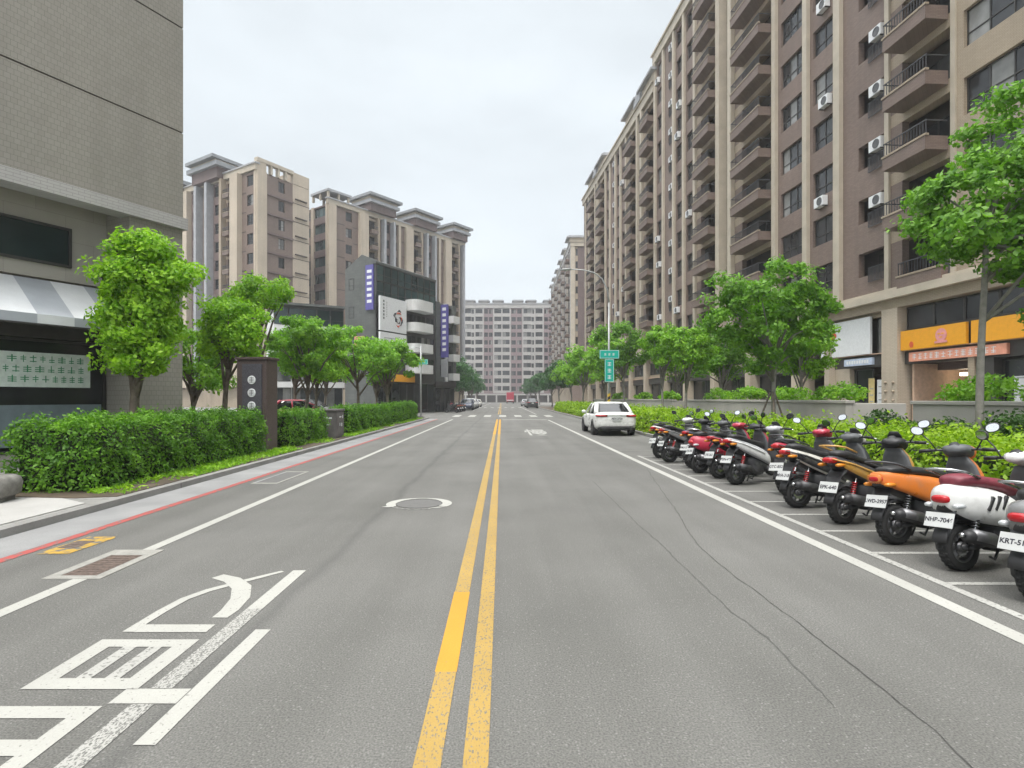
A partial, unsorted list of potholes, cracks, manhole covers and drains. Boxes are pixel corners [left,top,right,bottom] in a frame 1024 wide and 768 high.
crack [593,470,973,768]
manhole cover [383,498,452,509]
